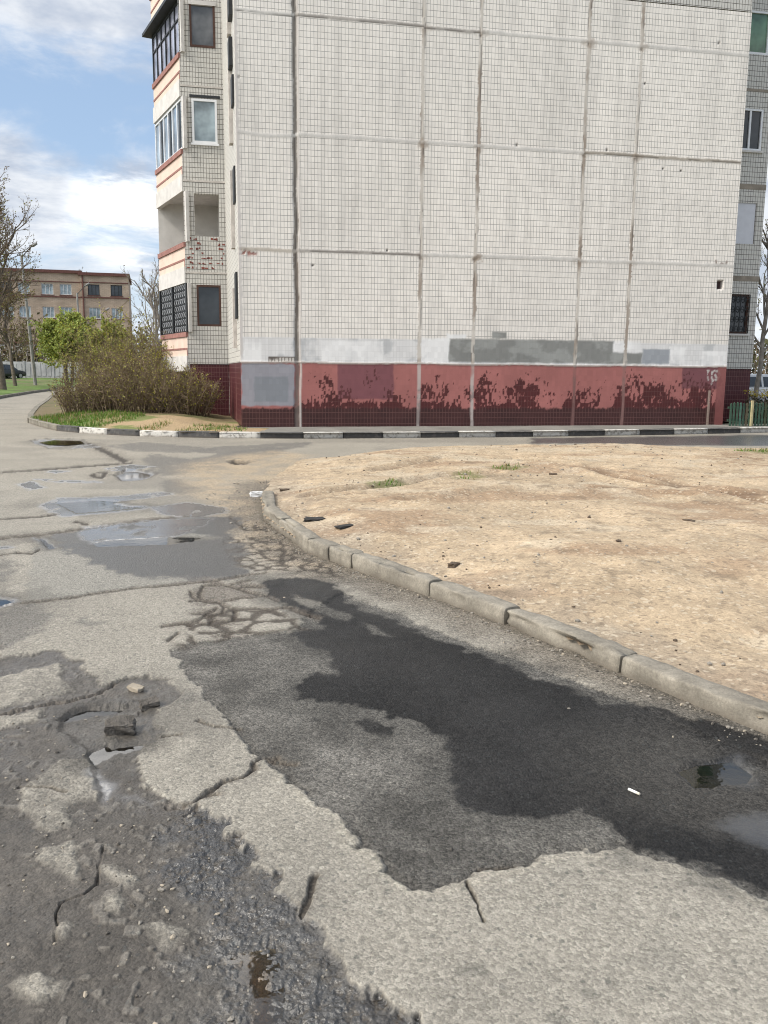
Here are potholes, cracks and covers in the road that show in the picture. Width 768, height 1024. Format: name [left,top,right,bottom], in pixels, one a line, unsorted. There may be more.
pothole [28,437,90,451]
crack [52,844,106,946]
pothole [670,762,727,790]
crack [159,515,358,652]
crack [161,755,300,818]
pothole [39,697,164,773]
pothole [109,468,159,482]
crack [464,866,516,923]
crack [297,872,322,922]
